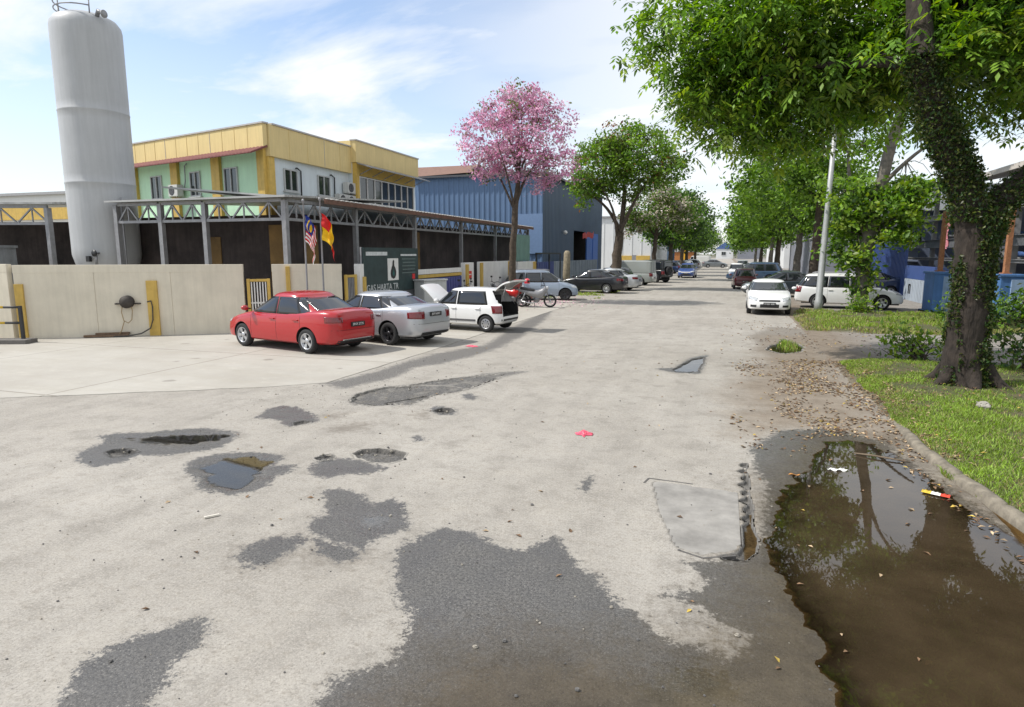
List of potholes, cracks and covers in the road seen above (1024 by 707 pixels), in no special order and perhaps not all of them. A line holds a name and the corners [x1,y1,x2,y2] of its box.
pothole [672,357,706,372]
pothole [348,374,504,406]
pothole [104,448,141,457]
pothole [351,446,409,464]
